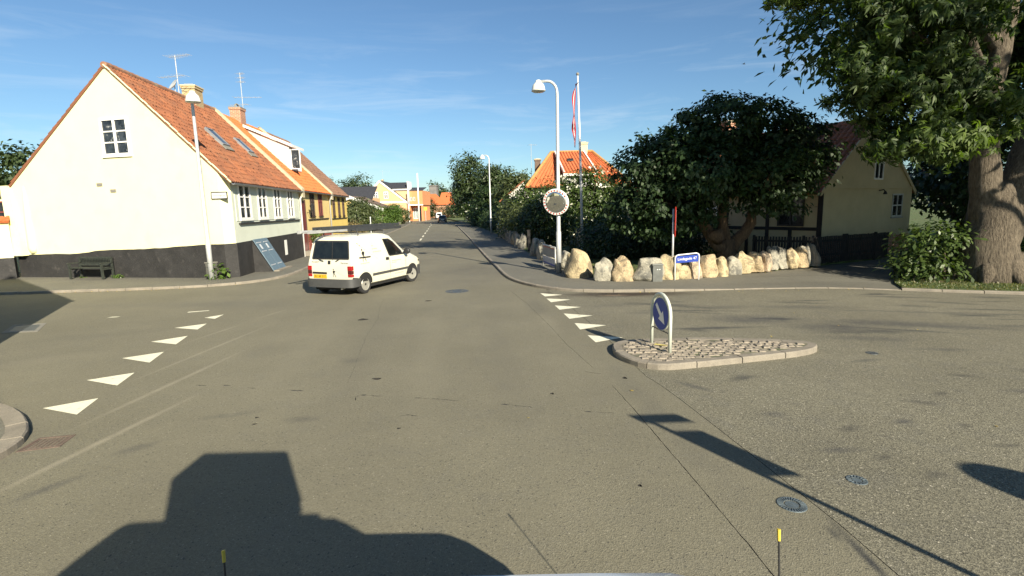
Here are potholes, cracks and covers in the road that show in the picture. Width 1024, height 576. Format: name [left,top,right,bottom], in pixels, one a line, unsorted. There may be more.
manhole cover [2,323,46,333]
manhole cover [846,475,868,485]
manhole cover [776,496,808,513]
drain grate [16,434,76,452]
